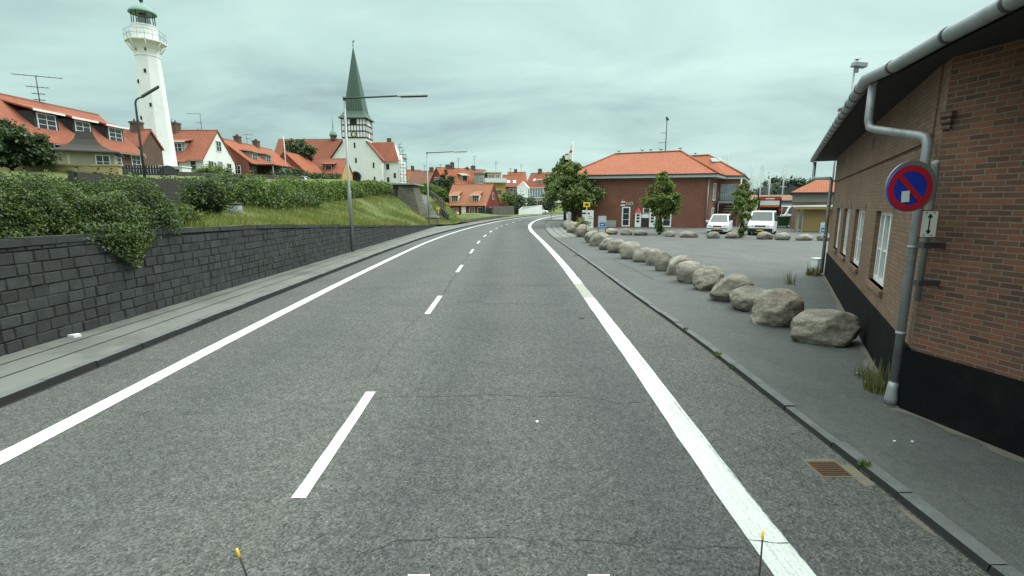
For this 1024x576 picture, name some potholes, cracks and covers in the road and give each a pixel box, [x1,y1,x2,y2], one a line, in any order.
drain grate [801,459,858,478]
